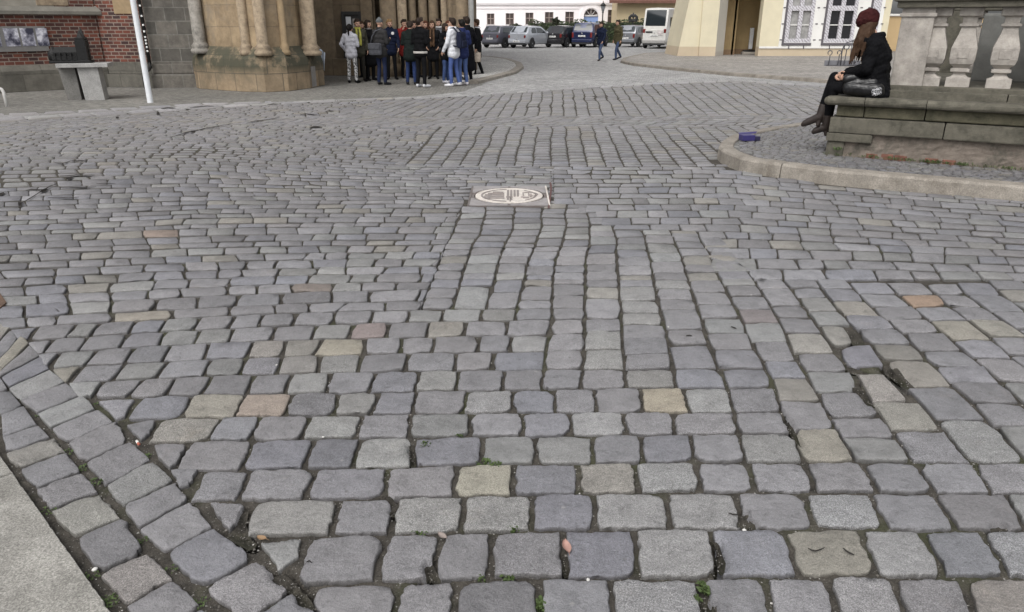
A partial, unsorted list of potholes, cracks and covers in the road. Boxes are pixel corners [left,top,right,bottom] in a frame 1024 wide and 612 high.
crack [20,160,114,204]
manhole cover [467,186,550,208]
